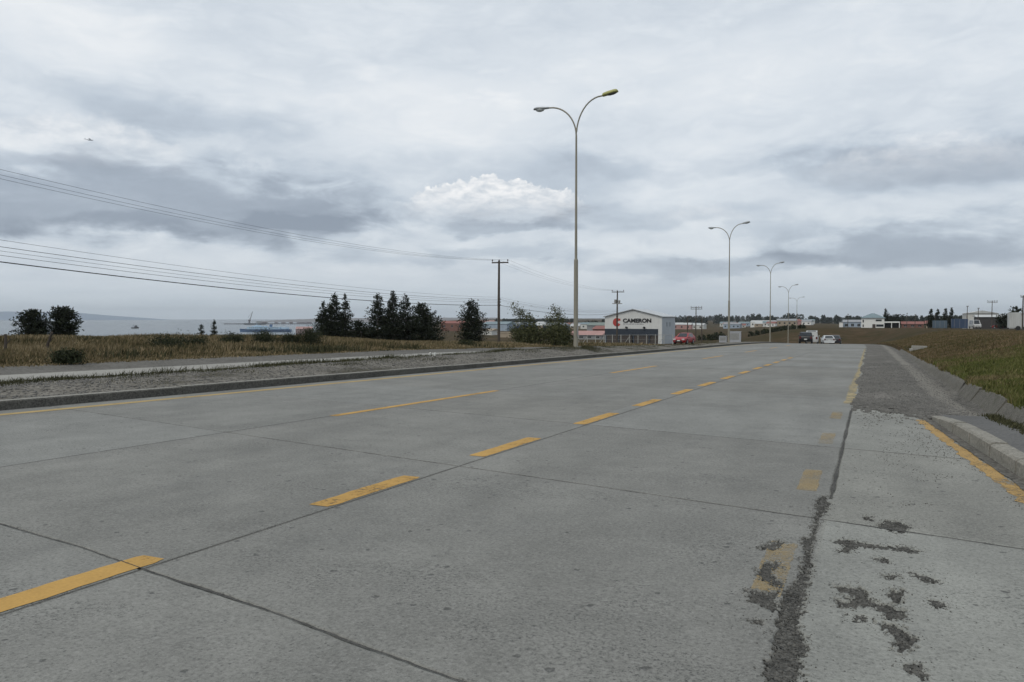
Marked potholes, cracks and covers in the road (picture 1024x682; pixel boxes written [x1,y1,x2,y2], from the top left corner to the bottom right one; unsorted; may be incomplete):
pothole [833,587,918,653]
pothole [744,541,785,612]
